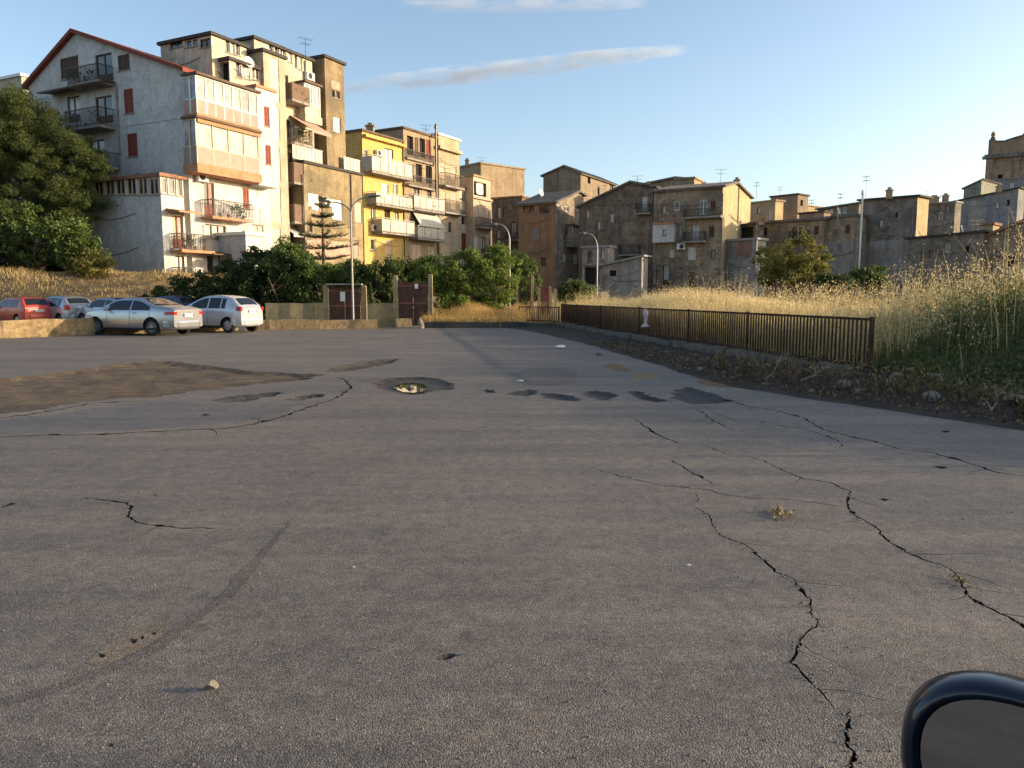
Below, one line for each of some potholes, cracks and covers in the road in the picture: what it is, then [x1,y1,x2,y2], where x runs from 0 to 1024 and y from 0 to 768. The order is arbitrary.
crack [80,497,213,536]
crack [753,457,1024,629]
crack [592,418,902,768]
crack [698,400,1023,476]
crack [0,377,362,437]
pothole [371,377,455,395]
